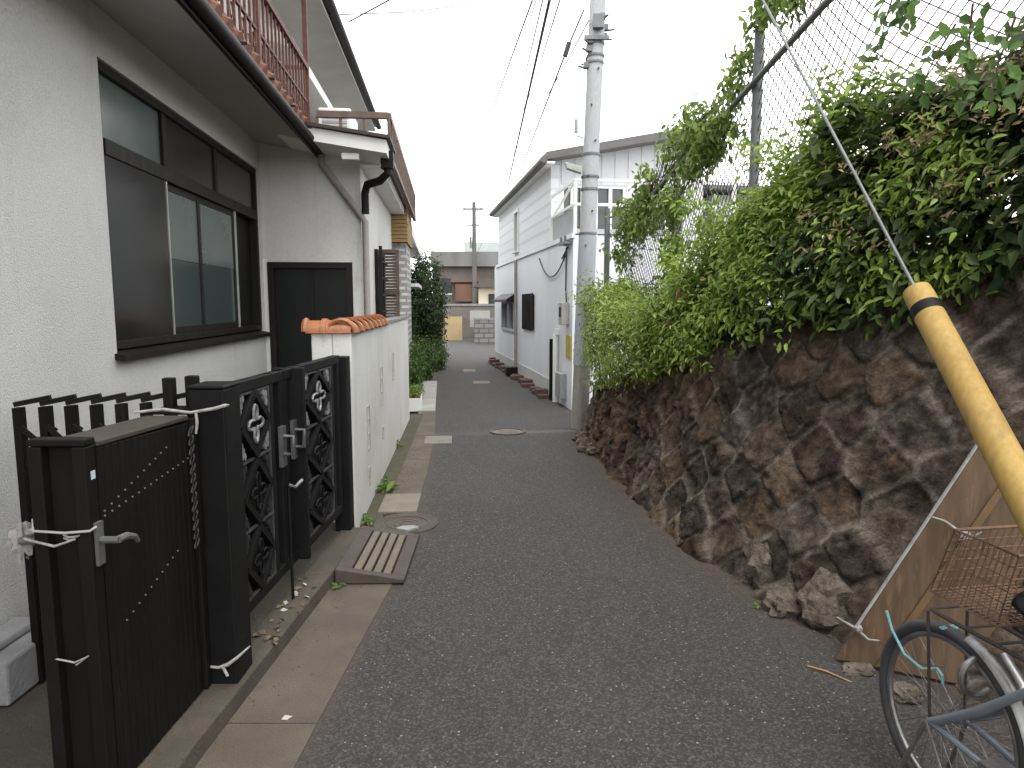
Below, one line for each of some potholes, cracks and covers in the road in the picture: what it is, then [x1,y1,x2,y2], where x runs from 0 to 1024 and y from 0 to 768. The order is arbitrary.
utility cover [424,436,452,444]
manhole cover [373,513,438,534]
